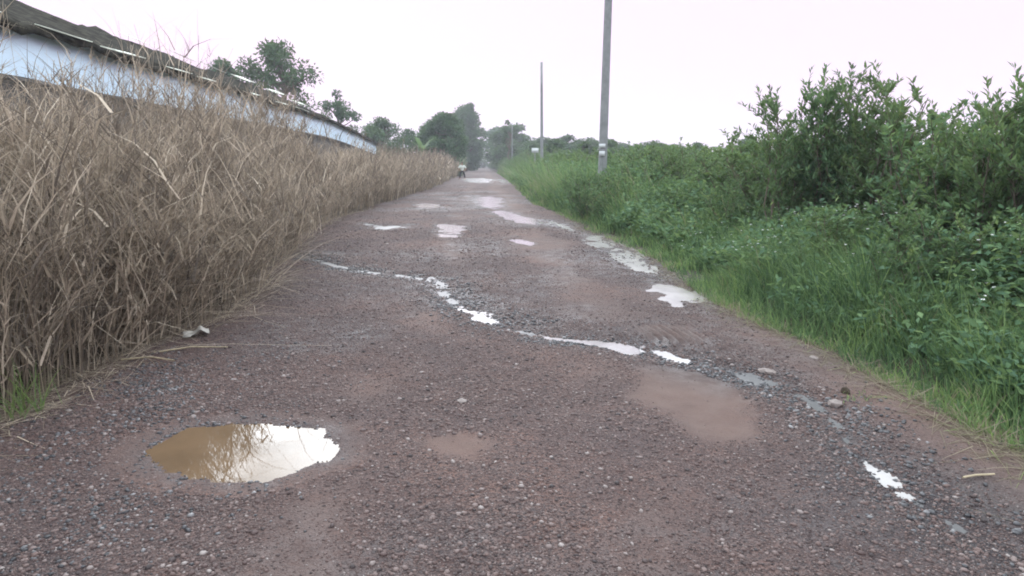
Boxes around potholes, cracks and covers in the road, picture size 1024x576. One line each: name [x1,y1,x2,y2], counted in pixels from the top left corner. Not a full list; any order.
pothole [430,224,471,234]
pothole [466,196,508,209]
pothole [111,410,374,498]
pothole [356,222,420,230]
